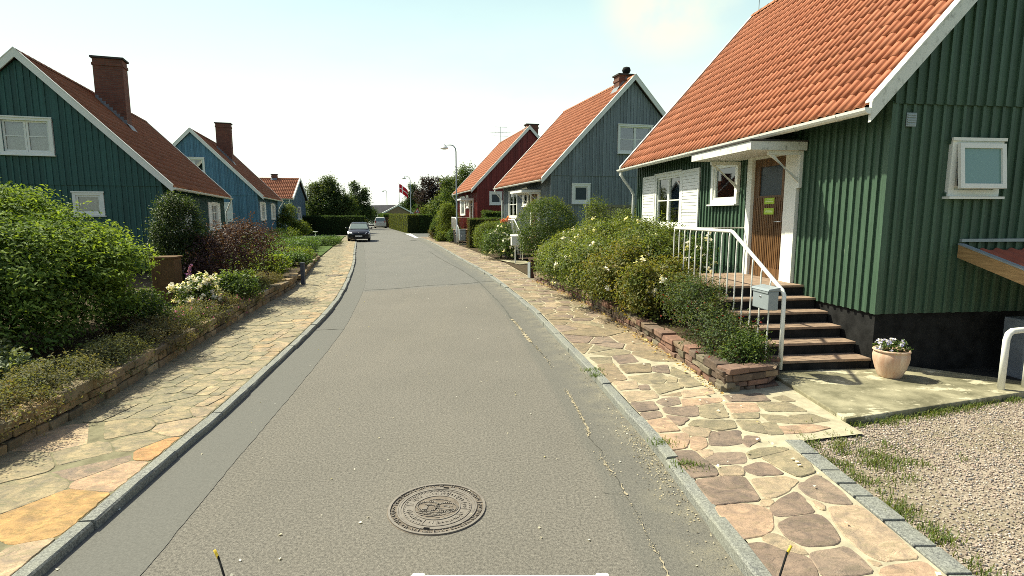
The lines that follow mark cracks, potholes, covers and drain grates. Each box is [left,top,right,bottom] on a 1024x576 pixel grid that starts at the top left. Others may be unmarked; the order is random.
manhole cover [387,483,486,536]
crack [565,389,669,576]
